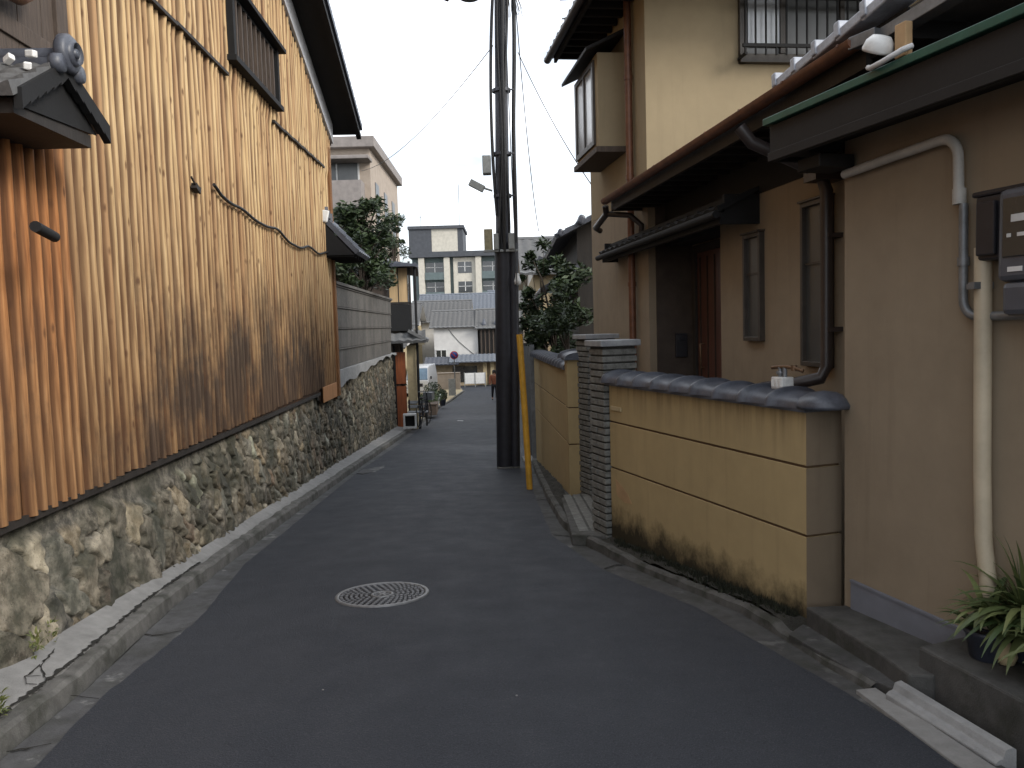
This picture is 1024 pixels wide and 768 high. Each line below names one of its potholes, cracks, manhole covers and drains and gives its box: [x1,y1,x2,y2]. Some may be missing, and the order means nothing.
manhole cover [335,582,429,608]
